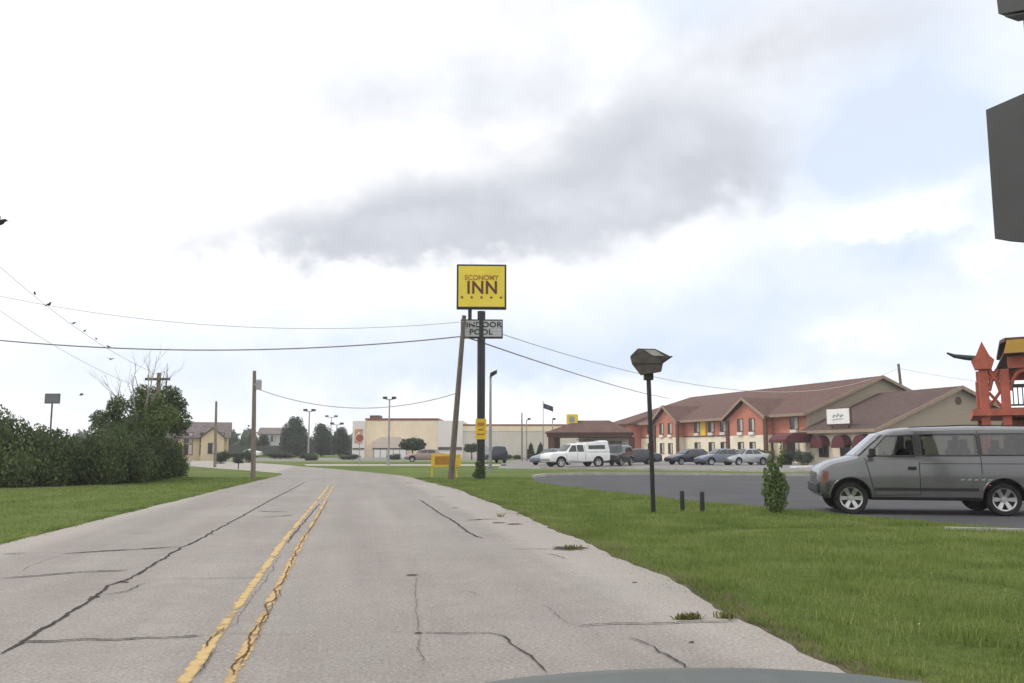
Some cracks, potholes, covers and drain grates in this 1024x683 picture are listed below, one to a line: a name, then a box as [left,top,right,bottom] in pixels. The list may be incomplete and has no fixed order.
crack [437,608,566,672]
crack [631,637,686,668]
crack [399,576,424,662]
crack [28,501,328,676]
